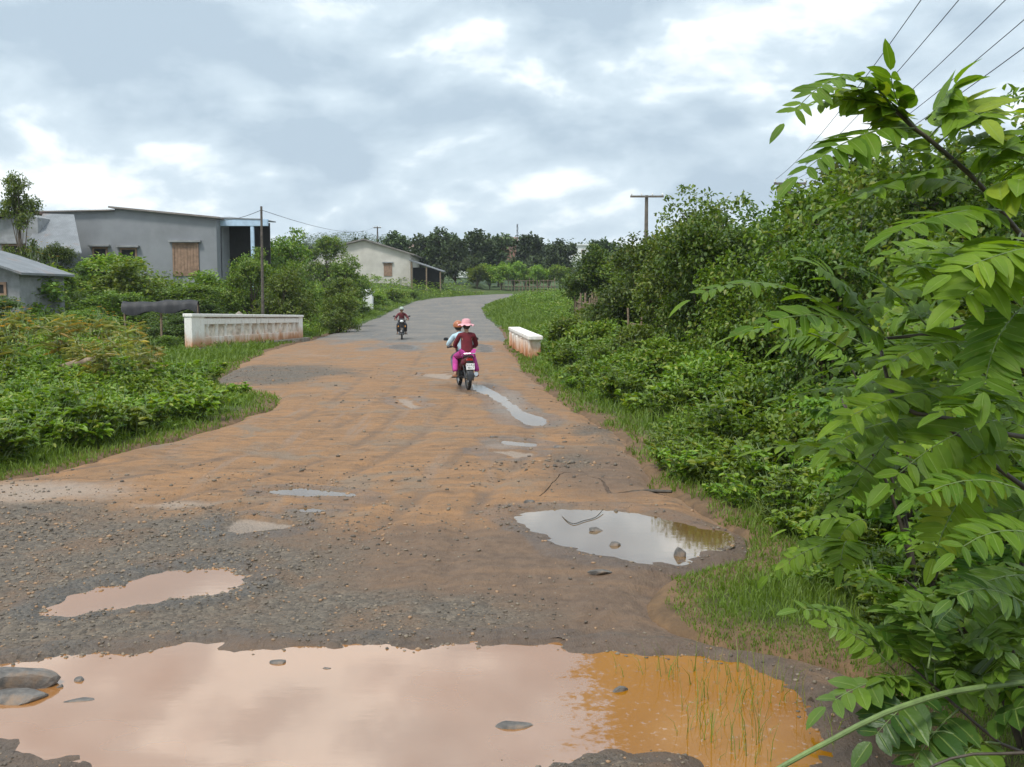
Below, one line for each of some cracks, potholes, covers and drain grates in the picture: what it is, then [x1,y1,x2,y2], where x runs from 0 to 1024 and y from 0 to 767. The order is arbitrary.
pothole [262,487,360,497]
pothole [504,505,735,566]
pothole [28,563,258,619]
pothole [499,439,539,447]
pothole [0,634,850,767]
pothole [471,382,550,426]
crack [539,472,665,496]
